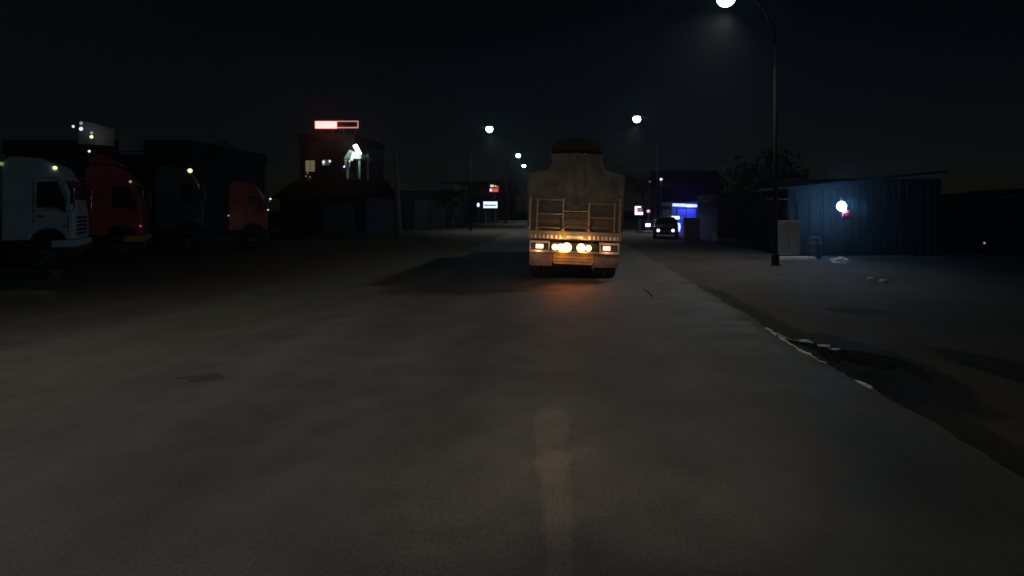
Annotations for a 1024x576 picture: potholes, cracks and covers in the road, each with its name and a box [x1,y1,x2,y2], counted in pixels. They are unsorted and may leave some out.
pothole [765,327,932,411]
pothole [177,374,225,382]
